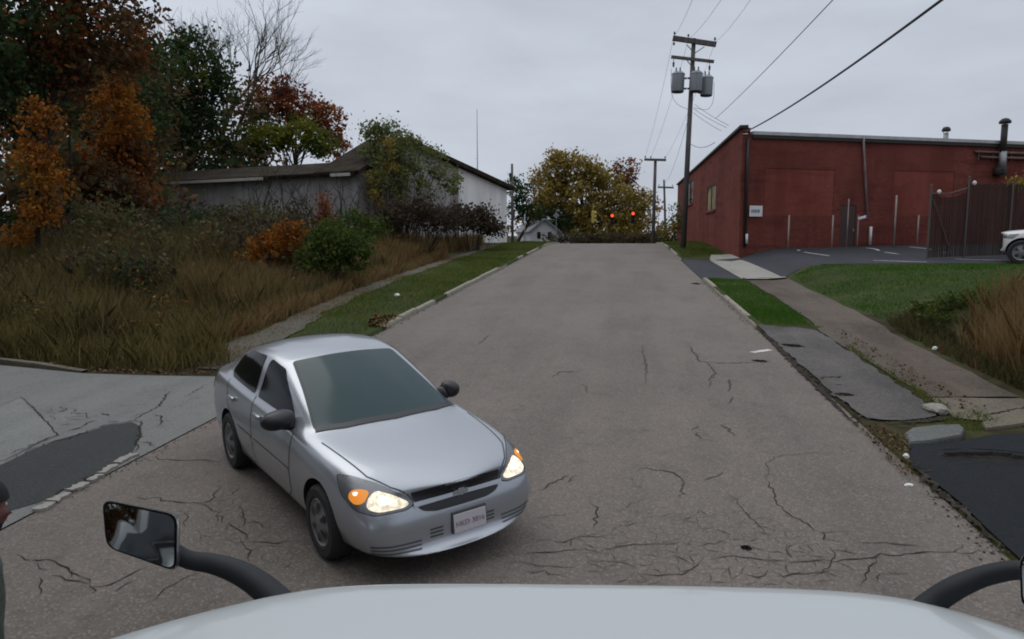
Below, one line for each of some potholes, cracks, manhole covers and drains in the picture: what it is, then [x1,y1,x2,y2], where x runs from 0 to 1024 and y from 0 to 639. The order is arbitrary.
crack [5,387,215,463]
crack [522,453,1003,586]
crack [691,348,772,403]
crack [139,486,295,567]
crack [18,554,146,593]
